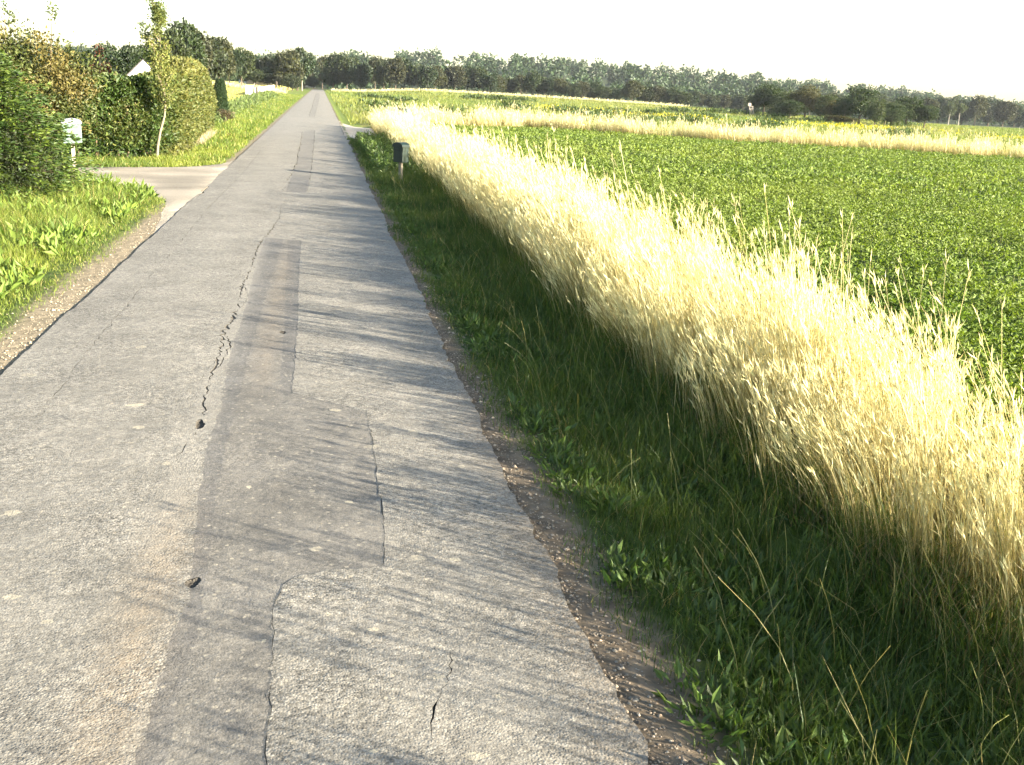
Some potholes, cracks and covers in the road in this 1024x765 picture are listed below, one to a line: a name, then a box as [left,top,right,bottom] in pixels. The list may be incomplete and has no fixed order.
crack [368,420,385,565]
crack [168,214,280,468]
crack [430,656,453,734]
crack [264,597,278,765]
